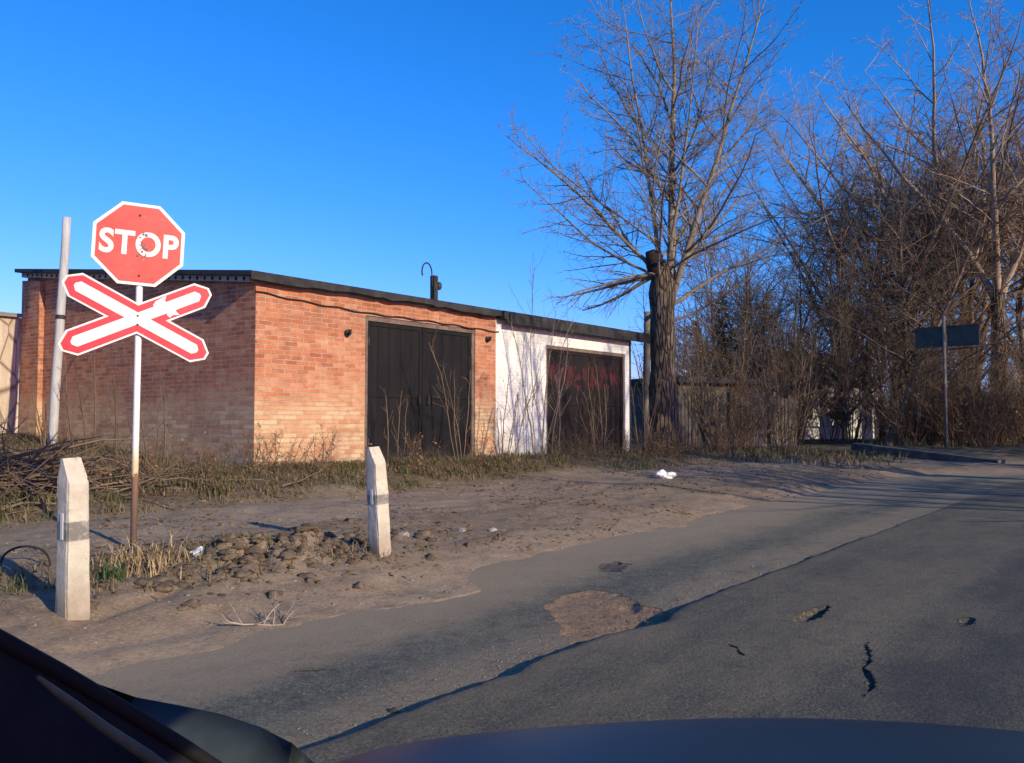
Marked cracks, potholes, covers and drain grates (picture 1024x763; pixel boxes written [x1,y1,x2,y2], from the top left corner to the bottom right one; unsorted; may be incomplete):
pothole [952,617,977,627]
crack [858,642,877,697]
pothole [543,589,670,645]
pothole [791,605,831,622]
pothole [596,562,632,572]
